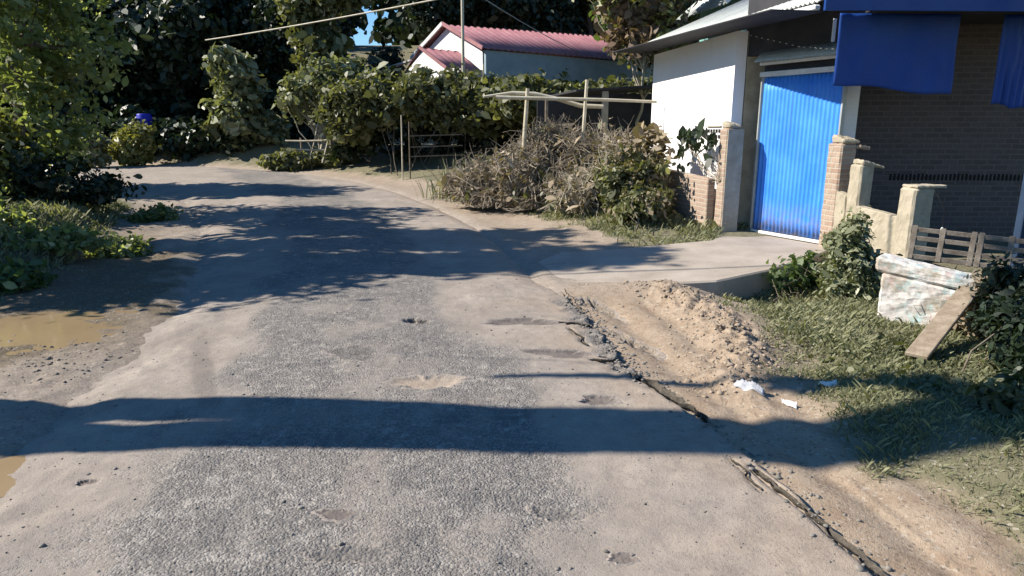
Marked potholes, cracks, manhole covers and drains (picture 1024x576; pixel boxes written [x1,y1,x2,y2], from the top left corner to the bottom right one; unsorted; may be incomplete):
pothole [573,394,624,406]
pothole [478,317,567,326]
pothole [75,478,100,488]
crack [559,290,708,423]
pothole [605,551,641,566]
crack [730,458,888,576]
pothole [514,348,604,359]
